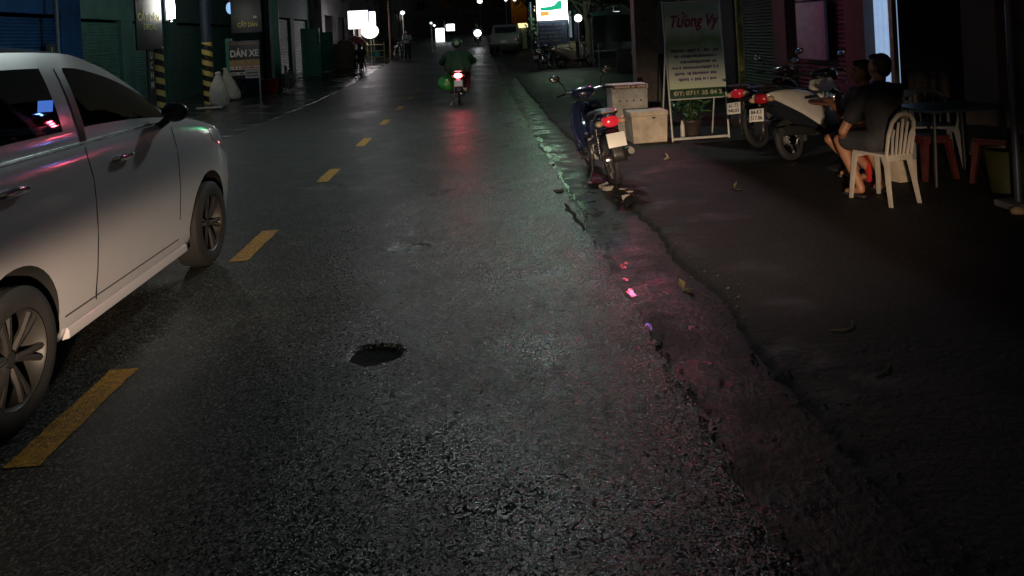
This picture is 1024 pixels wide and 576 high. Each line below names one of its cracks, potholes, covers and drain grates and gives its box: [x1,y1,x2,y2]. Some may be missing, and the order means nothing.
pothole [344,343,407,367]
crack [564,203,585,231]
pothole [385,243,434,253]
